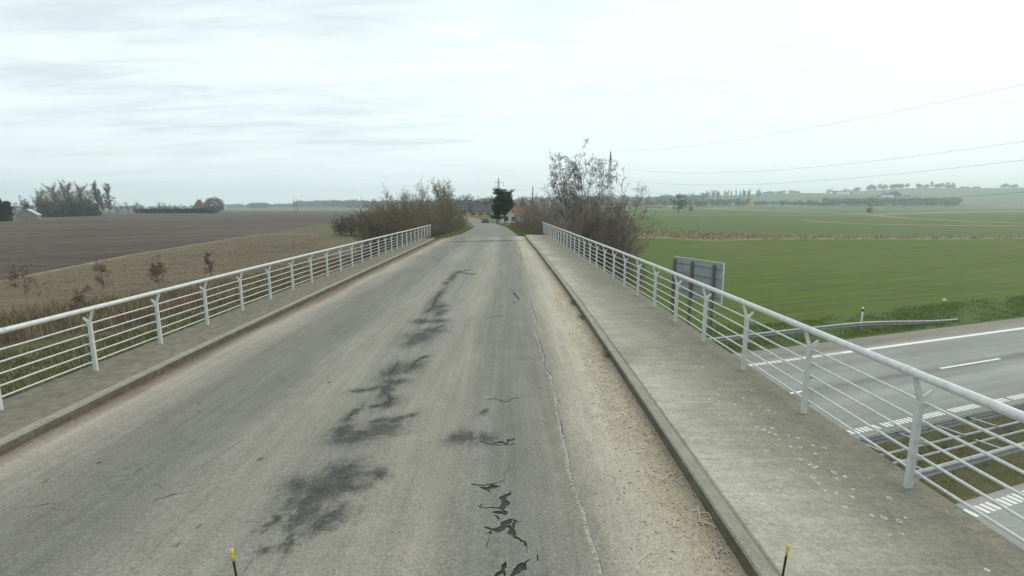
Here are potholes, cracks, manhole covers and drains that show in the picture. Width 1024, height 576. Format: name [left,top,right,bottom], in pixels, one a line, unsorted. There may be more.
crack [471,468,539,576]
